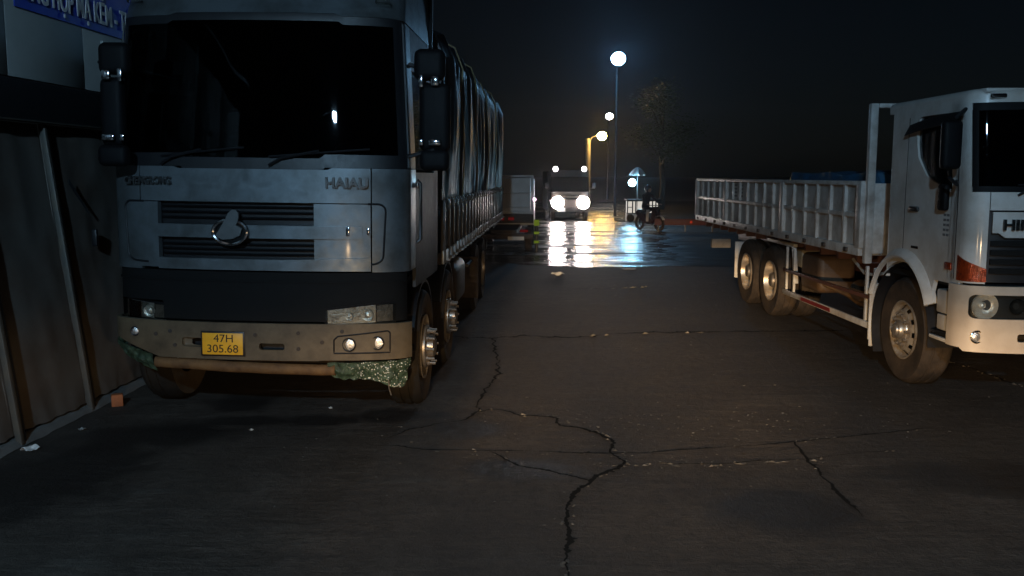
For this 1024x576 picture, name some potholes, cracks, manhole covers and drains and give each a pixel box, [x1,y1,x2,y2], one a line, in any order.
crack [380,330,932,576]
crack [949,361,1024,387]
